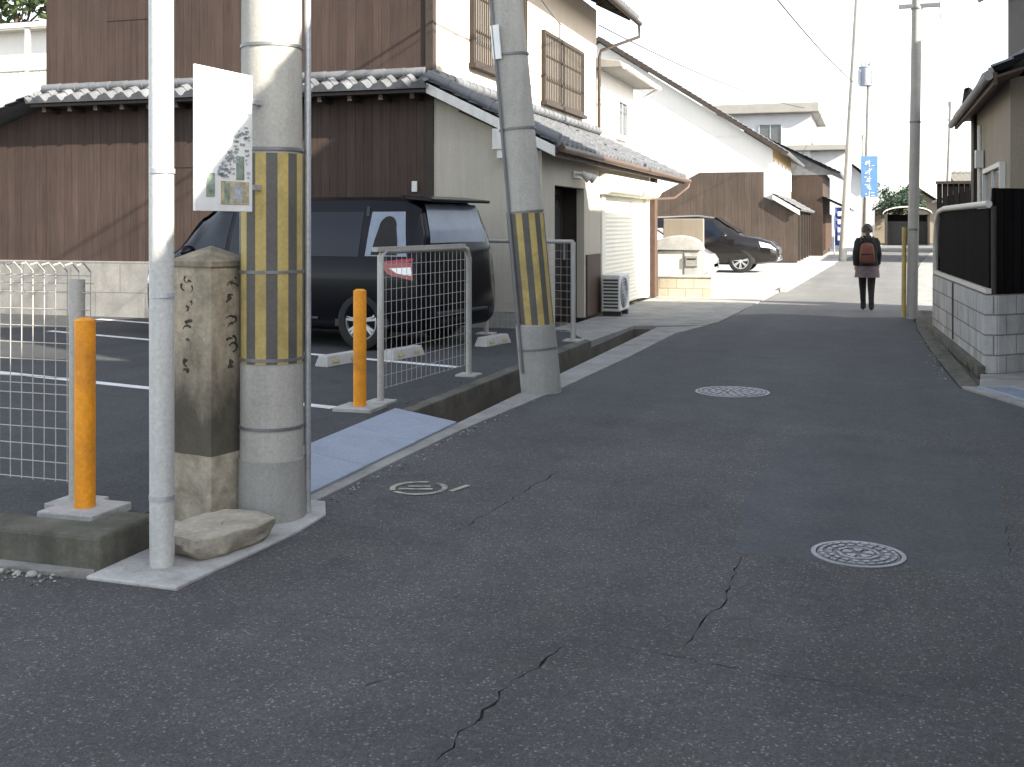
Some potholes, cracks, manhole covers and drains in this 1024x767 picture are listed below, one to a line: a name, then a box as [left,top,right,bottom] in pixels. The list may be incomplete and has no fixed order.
crack [685,551,746,645]
manhole cover [811,540,907,568]
crack [435,646,563,762]
manhole cover [695,386,770,398]
